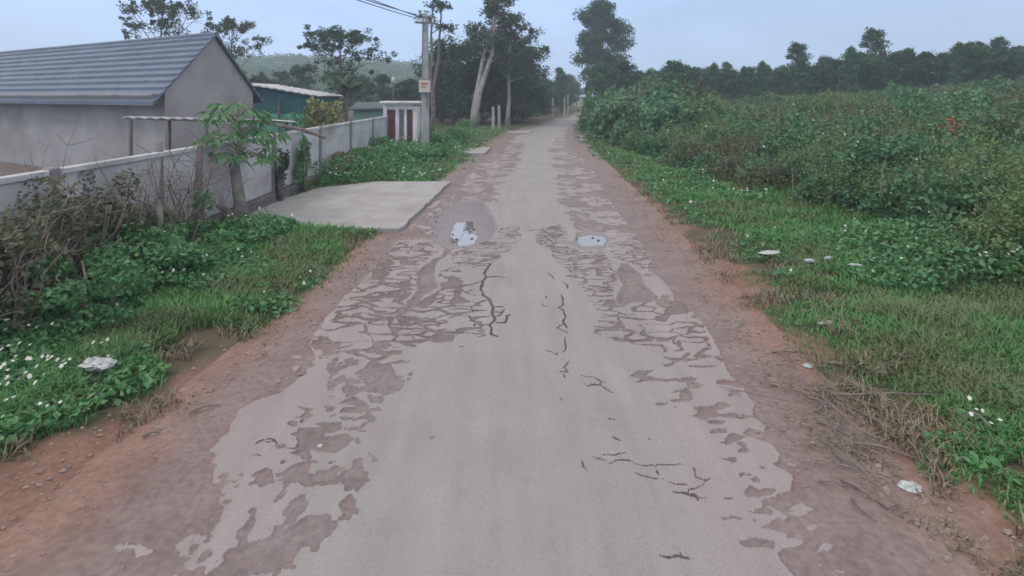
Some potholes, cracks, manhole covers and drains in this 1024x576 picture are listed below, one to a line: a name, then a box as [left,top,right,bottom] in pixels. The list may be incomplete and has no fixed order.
crack [312,224,723,393]
pothole [429,199,499,249]
crack [582,418,734,501]
crack [659,552,690,560]
pothole [571,230,610,250]
